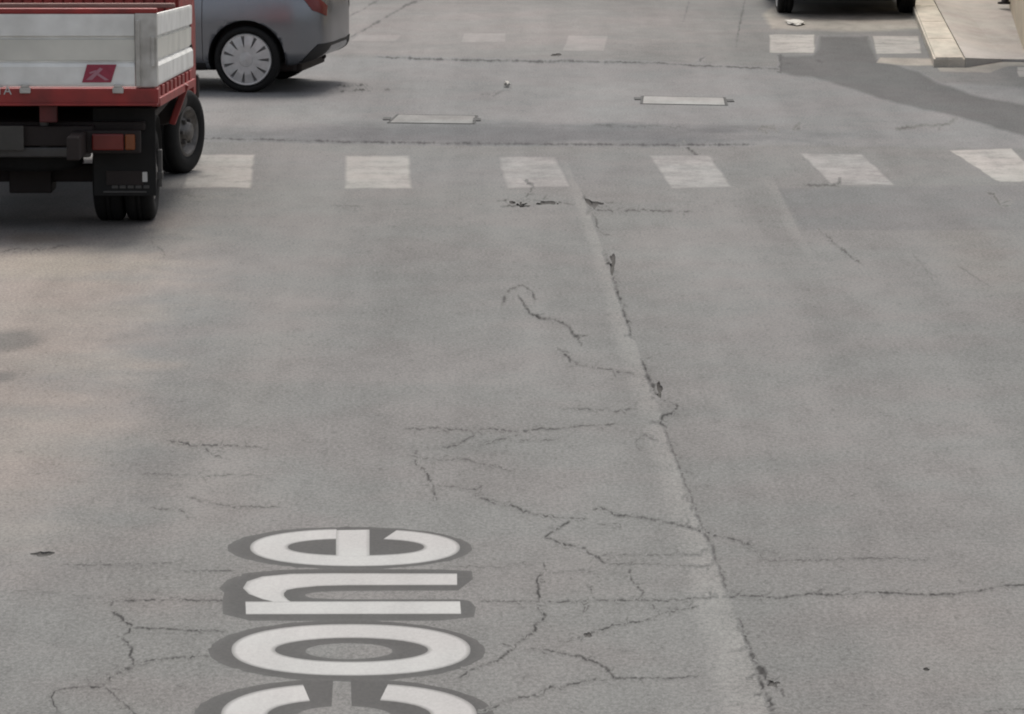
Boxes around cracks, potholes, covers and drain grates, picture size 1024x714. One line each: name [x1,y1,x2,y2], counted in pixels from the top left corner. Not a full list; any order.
manhole cover [383,114,481,124]
manhole cover [634,96,734,106]
crack [400,179,1024,714]
crack [0,558,241,714]
crack [140,438,283,521]
